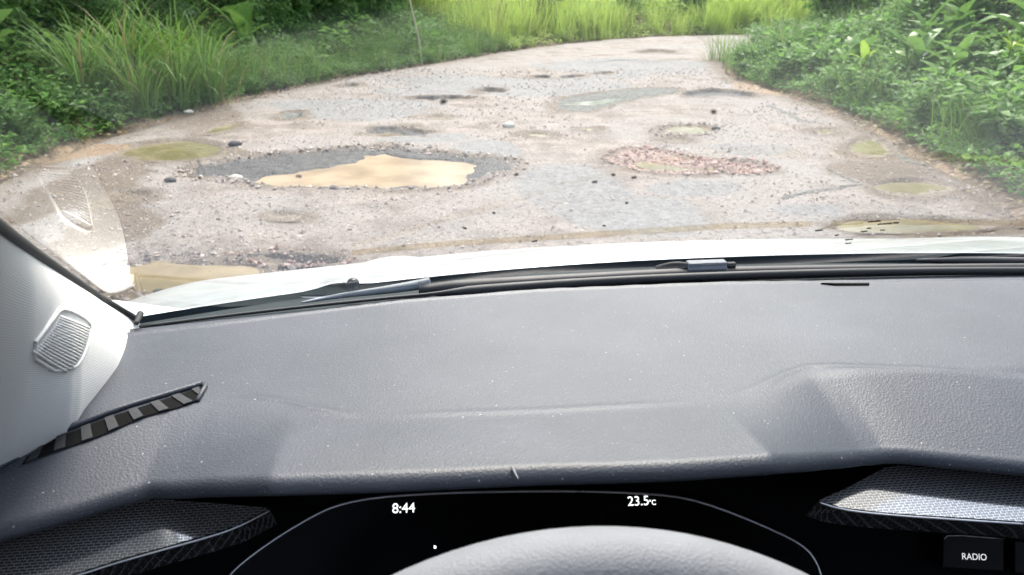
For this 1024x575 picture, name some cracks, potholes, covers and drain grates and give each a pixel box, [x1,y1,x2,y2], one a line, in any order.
pothole [259,209,311,222]
pothole [648,121,728,139]
pothole [601,145,729,175]
pothole [360,125,435,137]
pothole [275,109,308,120]
pothole [82,249,298,292]
crack [781,166,863,199]
pothole [174,142,530,192]
pothole [824,215,1003,235]
pothole [862,177,965,198]
pothole [842,136,899,159]
